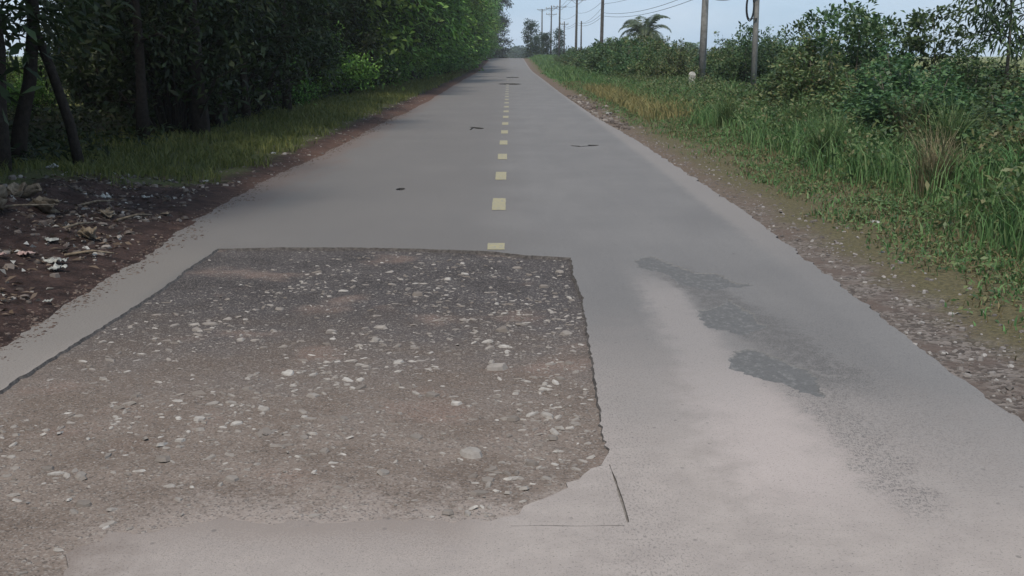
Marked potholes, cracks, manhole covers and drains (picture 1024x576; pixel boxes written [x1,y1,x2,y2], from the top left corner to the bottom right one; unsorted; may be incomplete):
pothole [0,247,610,576]
